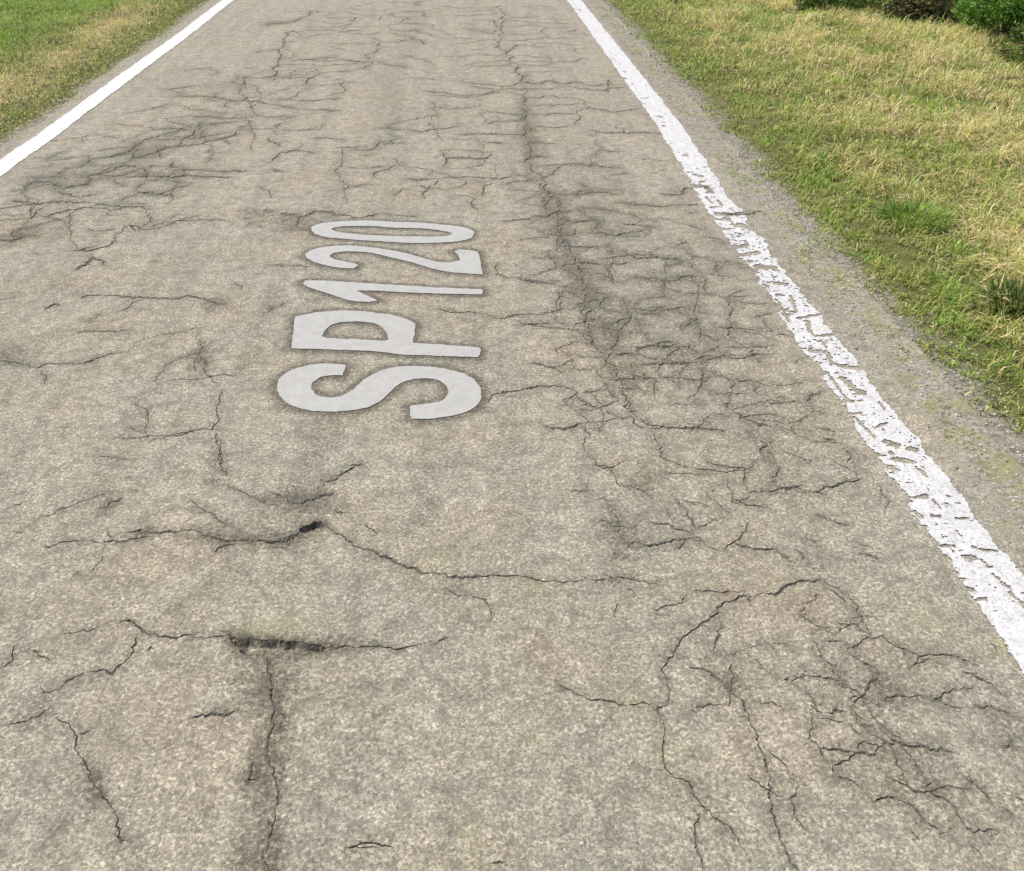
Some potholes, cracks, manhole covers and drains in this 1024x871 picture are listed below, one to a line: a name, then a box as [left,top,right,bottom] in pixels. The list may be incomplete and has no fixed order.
crack [486,359,591,407]
crack [0,128,238,250]
crack [621,202,698,297]
crack [76,256,106,270]
crack [747,695,1024,854]
crack [626,212,890,526]
crack [659,186,710,196]
crack [3,352,123,384]
crack [523,87,617,217]
